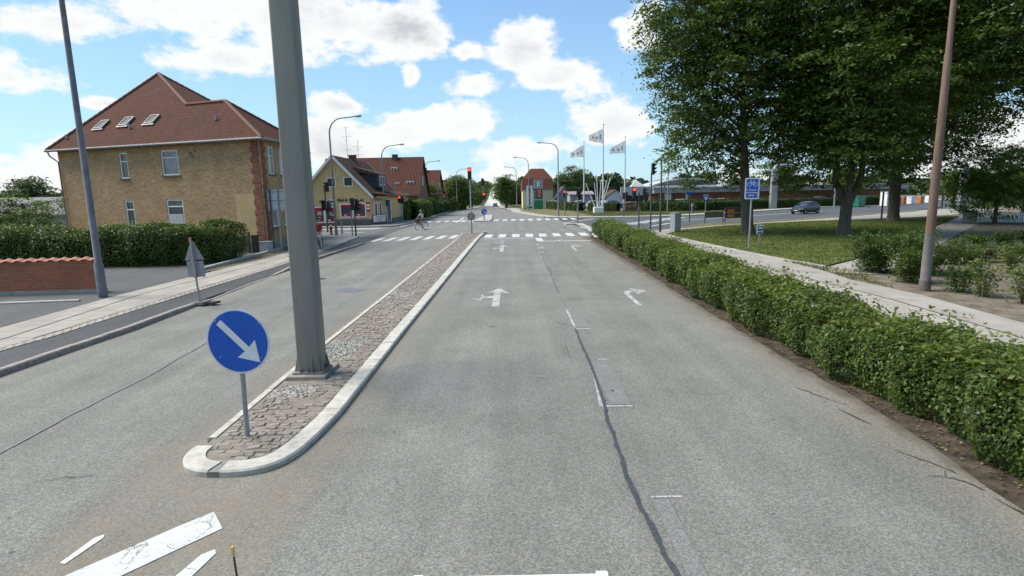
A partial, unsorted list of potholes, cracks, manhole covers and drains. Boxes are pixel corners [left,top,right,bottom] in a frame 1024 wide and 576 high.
crack [895,449,1024,514]
